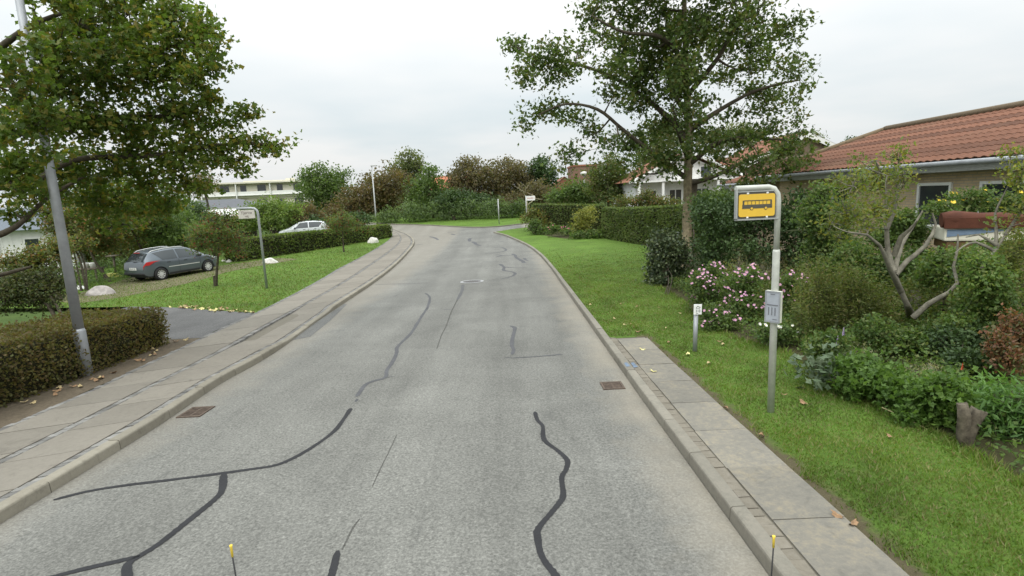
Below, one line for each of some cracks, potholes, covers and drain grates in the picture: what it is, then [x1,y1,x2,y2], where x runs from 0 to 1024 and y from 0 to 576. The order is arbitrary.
drain grate [600,381,626,390]
drain grate [176,406,215,418]
